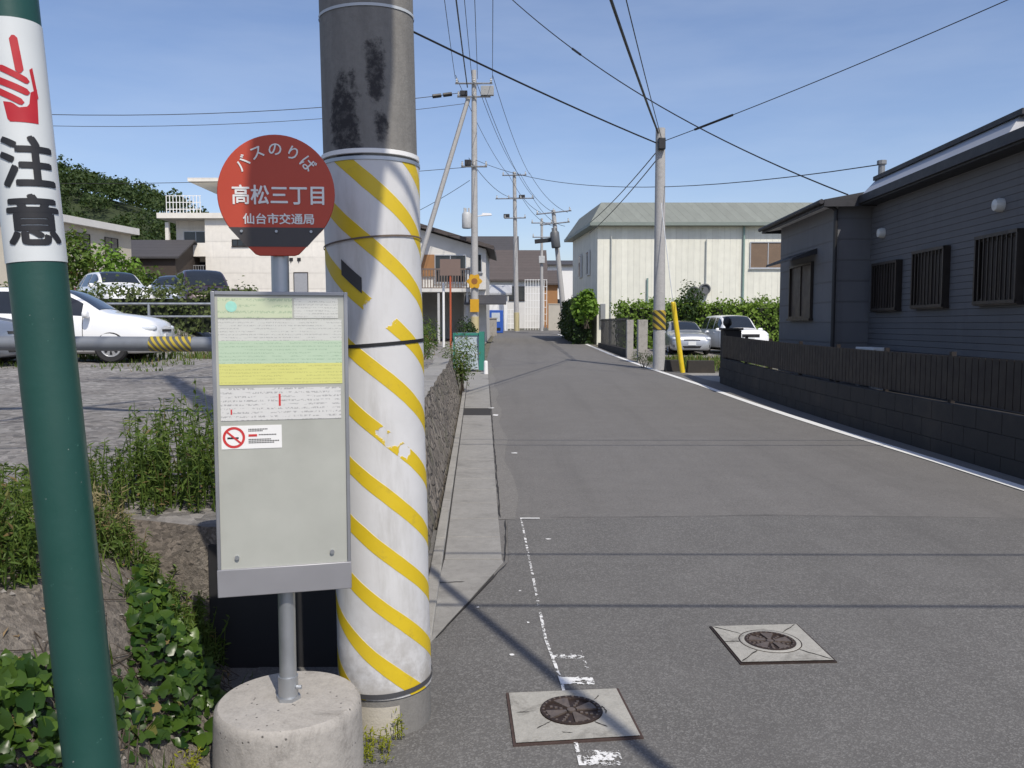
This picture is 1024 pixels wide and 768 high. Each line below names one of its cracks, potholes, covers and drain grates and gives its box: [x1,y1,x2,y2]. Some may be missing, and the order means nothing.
manhole cover [709,624,837,665]
manhole cover [506,688,644,747]
